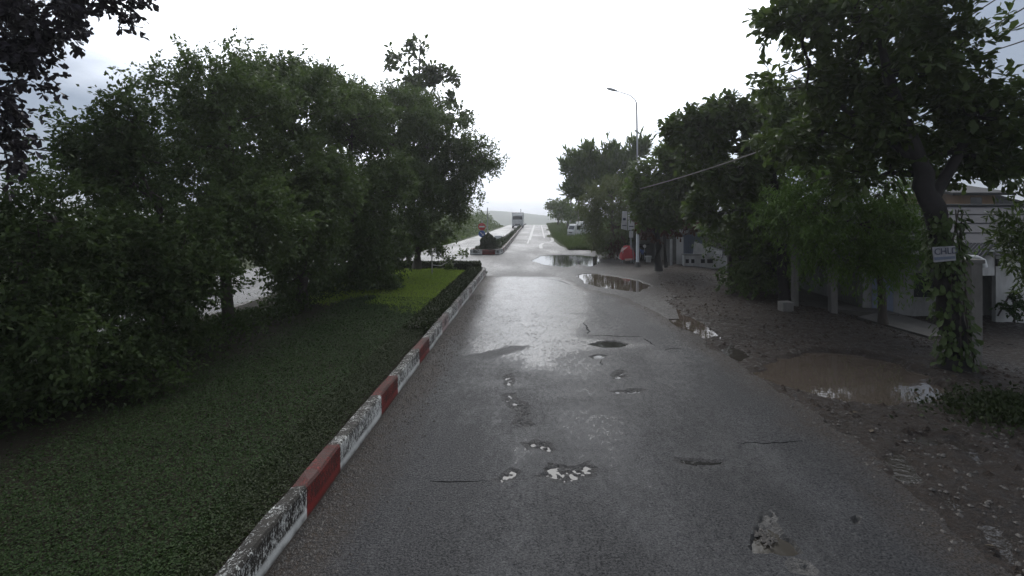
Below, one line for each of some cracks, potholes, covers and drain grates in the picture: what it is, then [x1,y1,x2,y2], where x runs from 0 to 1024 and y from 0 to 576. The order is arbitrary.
pothole [519,439,556,454]
pothole [748,509,803,556]
pothole [671,456,727,466]
pothole [533,460,599,484]
pothole [500,392,536,428]
pothole [587,340,629,348]
crack [571,313,679,350]
pothole [490,467,522,484]
pothole [610,369,630,379]
pothole [502,373,516,387]
